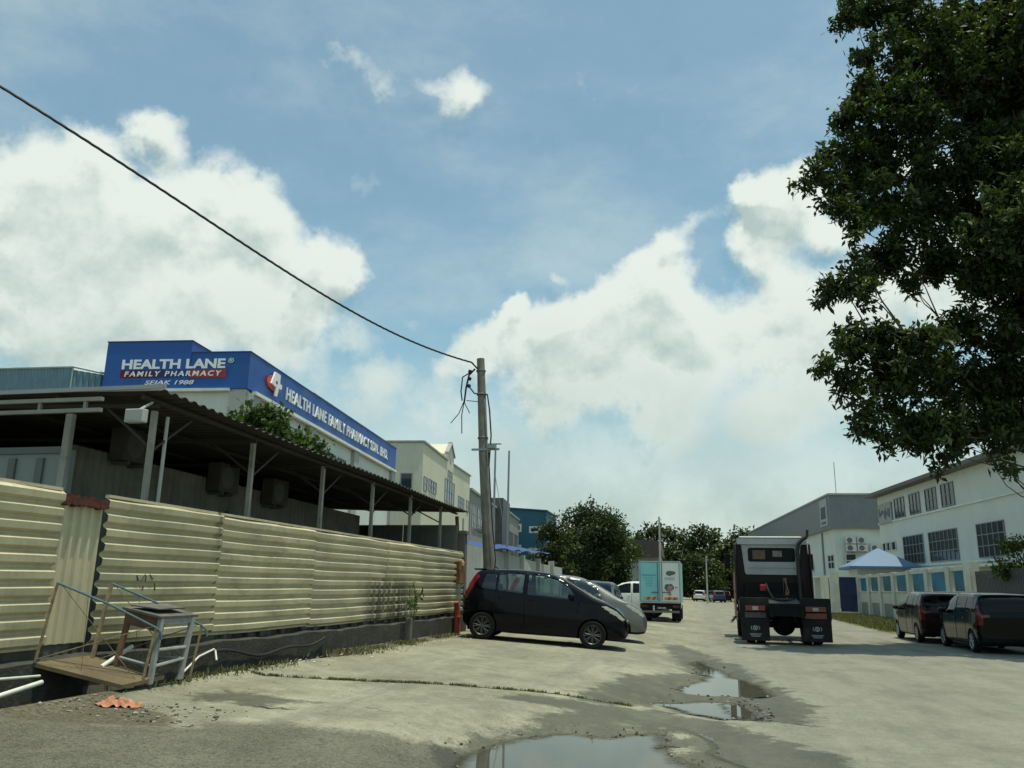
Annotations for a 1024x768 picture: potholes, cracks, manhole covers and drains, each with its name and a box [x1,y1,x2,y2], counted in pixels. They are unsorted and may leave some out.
pothole [625,694,757,720]
pothole [444,727,752,768]
pothole [670,660,771,699]
